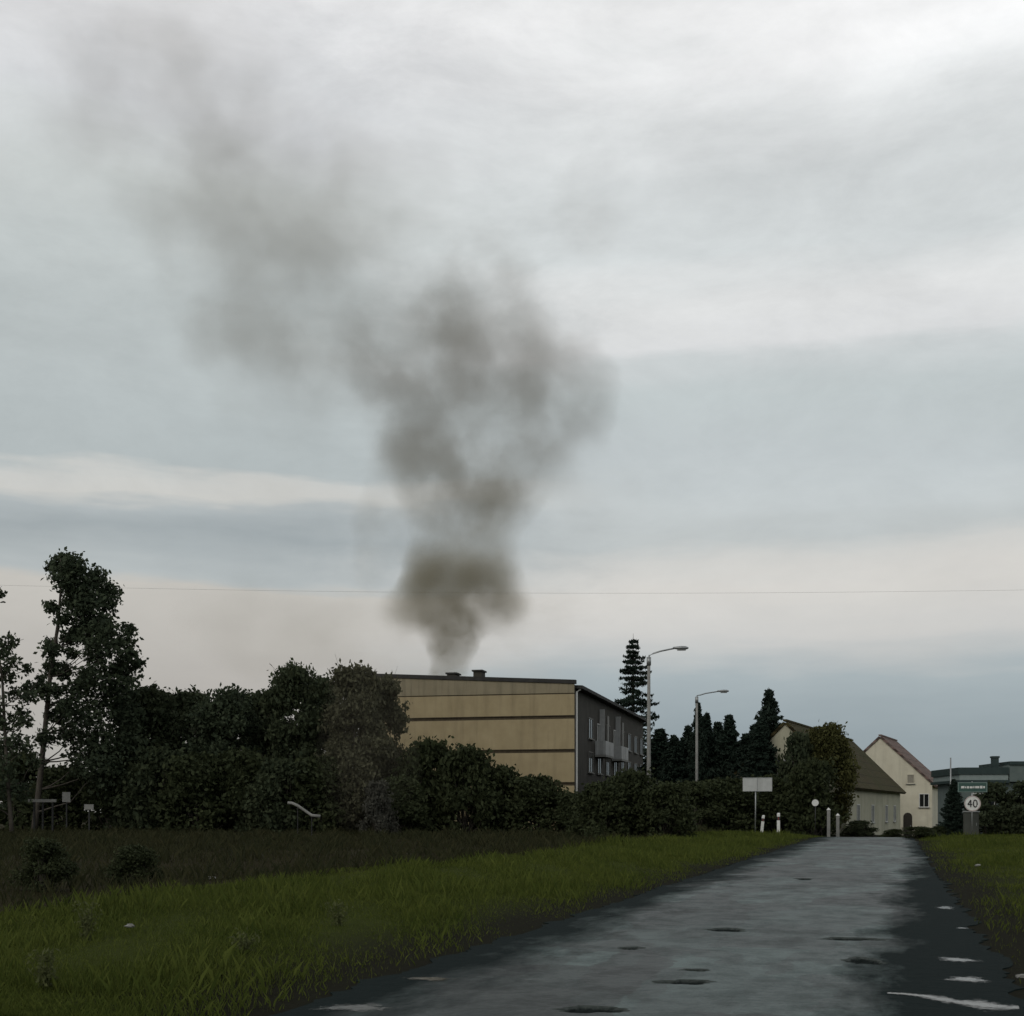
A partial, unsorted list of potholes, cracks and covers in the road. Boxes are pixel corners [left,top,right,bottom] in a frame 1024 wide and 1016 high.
pothole [840,956,886,965]
pothole [553,1005,630,1013]
